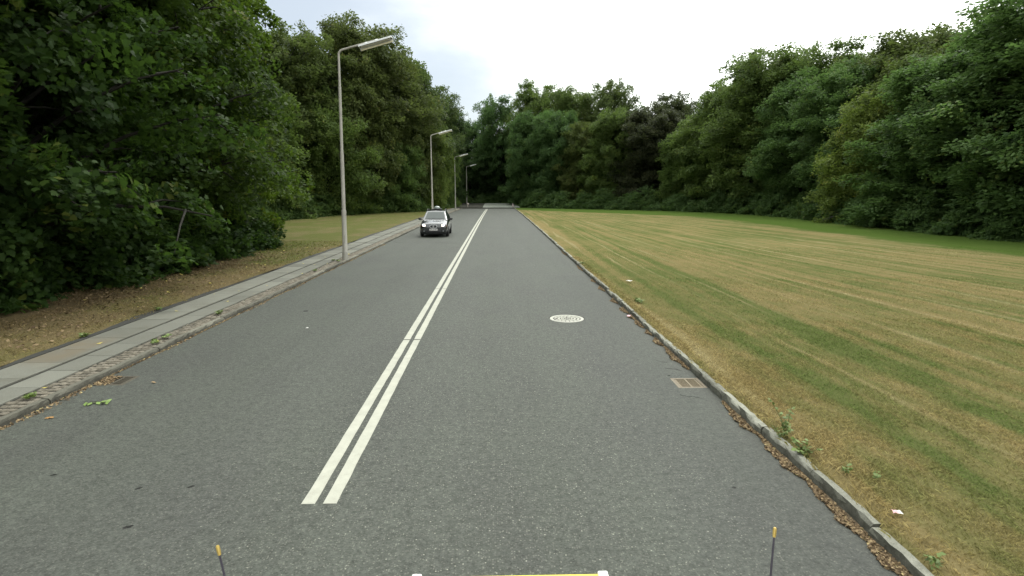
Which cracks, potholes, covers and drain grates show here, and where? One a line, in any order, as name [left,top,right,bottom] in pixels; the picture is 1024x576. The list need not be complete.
manhole cover [549,315,584,323]
